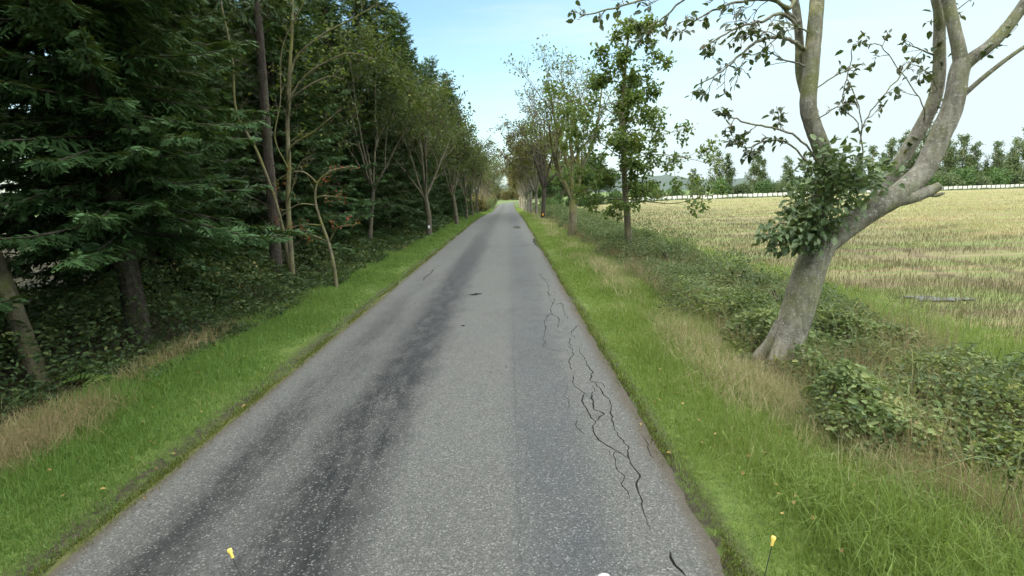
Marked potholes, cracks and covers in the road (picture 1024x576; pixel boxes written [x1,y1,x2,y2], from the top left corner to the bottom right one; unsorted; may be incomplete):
crack [669,551,686,576]
crack [539,274,654,530]
